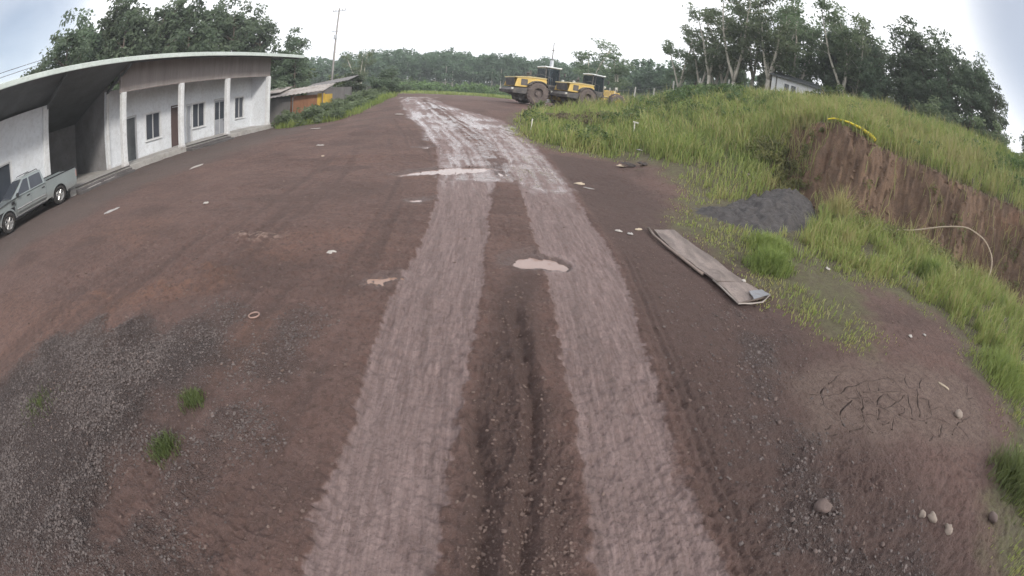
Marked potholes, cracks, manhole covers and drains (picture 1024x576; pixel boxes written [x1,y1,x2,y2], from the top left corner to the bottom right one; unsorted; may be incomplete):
pothole [385,164,510,178]
pothole [490,246,586,278]
